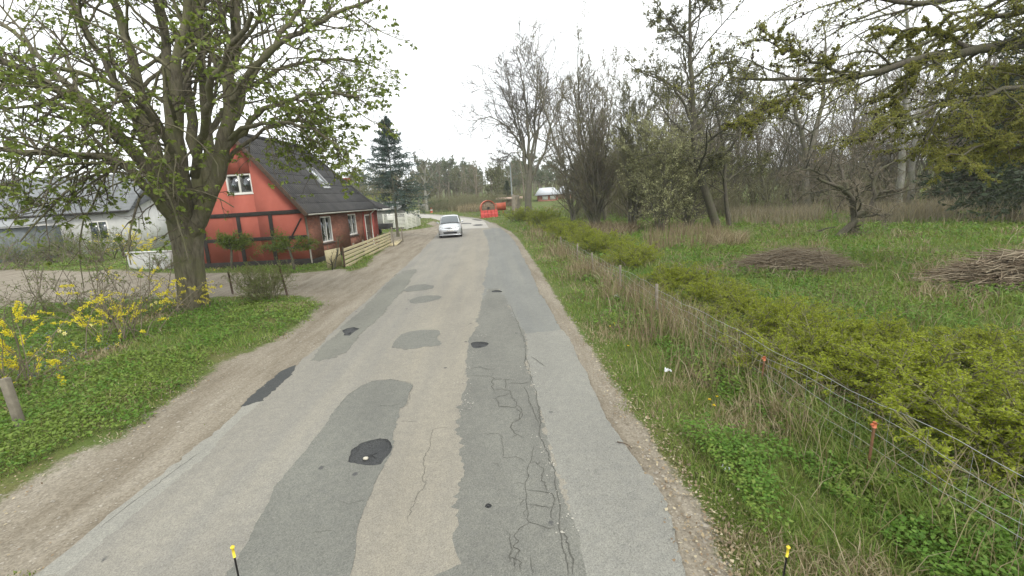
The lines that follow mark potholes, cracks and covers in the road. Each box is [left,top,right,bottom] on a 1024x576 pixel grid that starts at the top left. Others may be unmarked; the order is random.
pothole [348,438,392,465]
crack [467,311,574,575]
